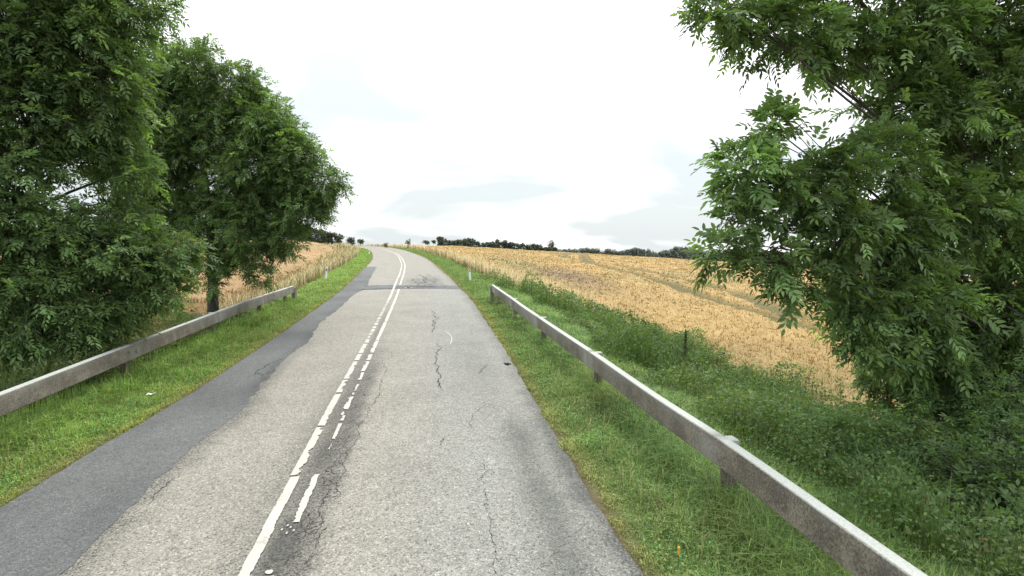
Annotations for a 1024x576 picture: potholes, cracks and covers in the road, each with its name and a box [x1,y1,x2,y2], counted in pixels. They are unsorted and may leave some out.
crack [477,465,502,574]
crack [279,351,393,576]
